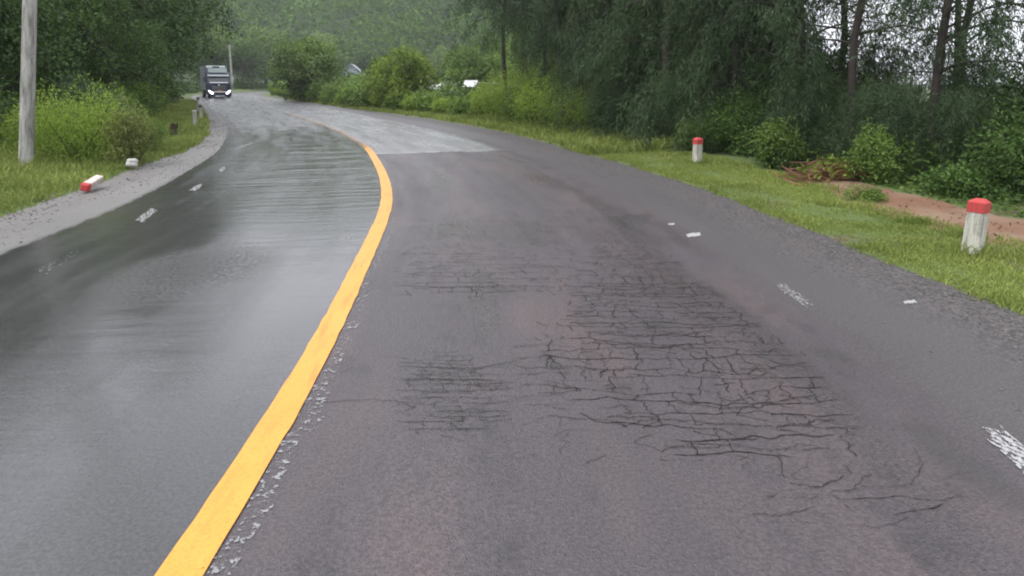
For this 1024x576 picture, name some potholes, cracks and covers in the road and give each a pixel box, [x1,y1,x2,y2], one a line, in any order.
crack [492,334,608,464]
crack [537,245,858,475]
crack [394,216,578,299]
crack [332,351,526,441]
crack [752,449,979,527]
